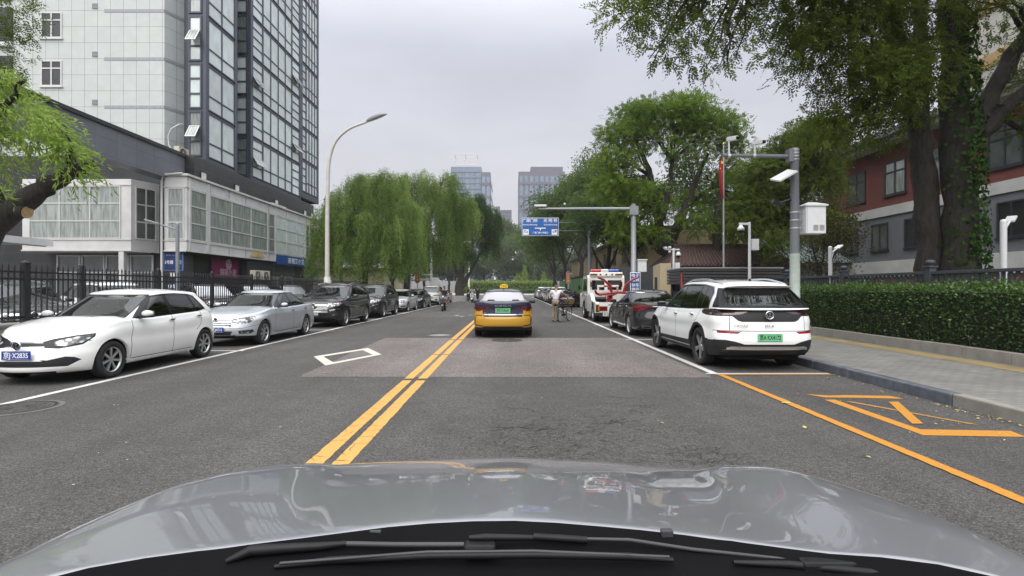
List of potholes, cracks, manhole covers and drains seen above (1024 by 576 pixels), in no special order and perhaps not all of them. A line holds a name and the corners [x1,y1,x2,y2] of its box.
manhole cover [0,400,66,416]
